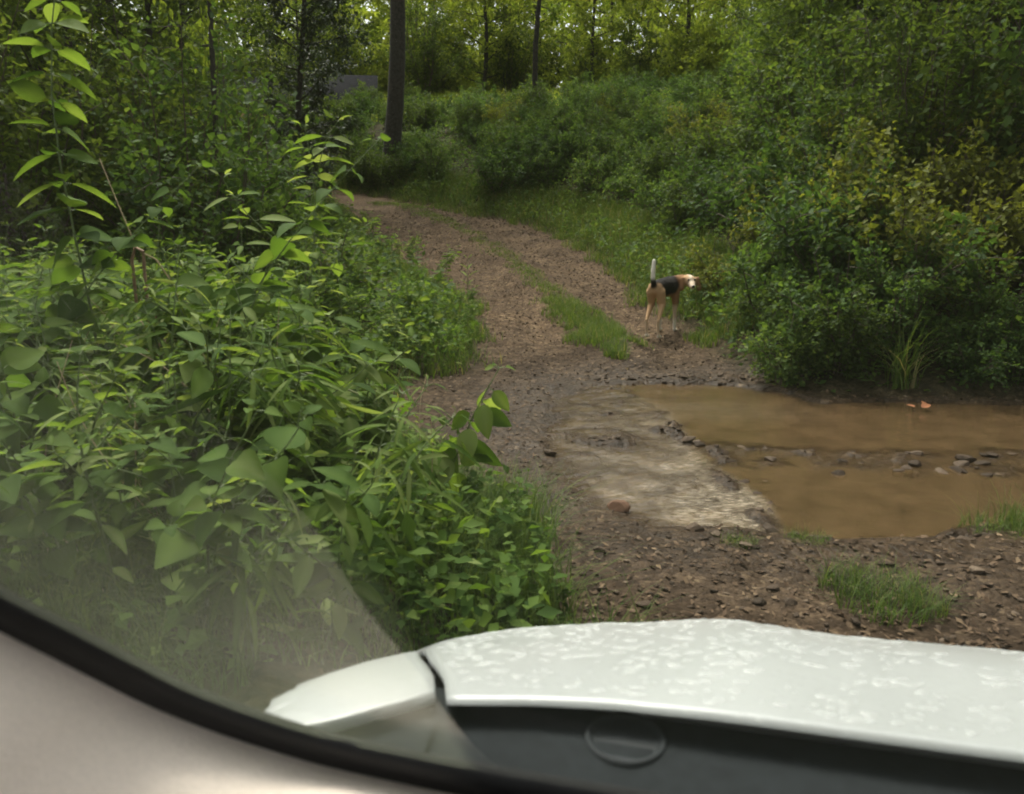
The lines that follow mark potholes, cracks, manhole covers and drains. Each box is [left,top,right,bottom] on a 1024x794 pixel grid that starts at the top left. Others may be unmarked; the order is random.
pothole [517,377,1024,546]
